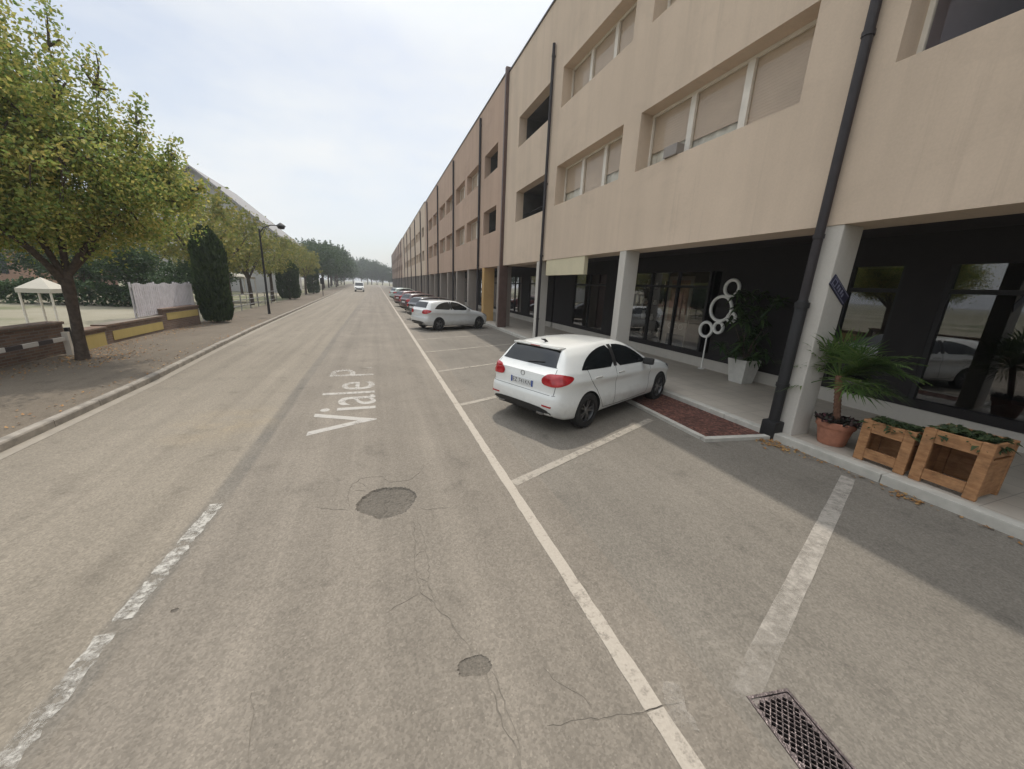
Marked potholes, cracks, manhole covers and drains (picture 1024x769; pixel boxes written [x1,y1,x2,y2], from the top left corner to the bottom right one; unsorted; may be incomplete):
drain grate [746,688,856,769]
crack [547,672,684,726]
pothole [457,654,492,677]
crack [317,467,522,769]
pothole [355,487,417,519]
